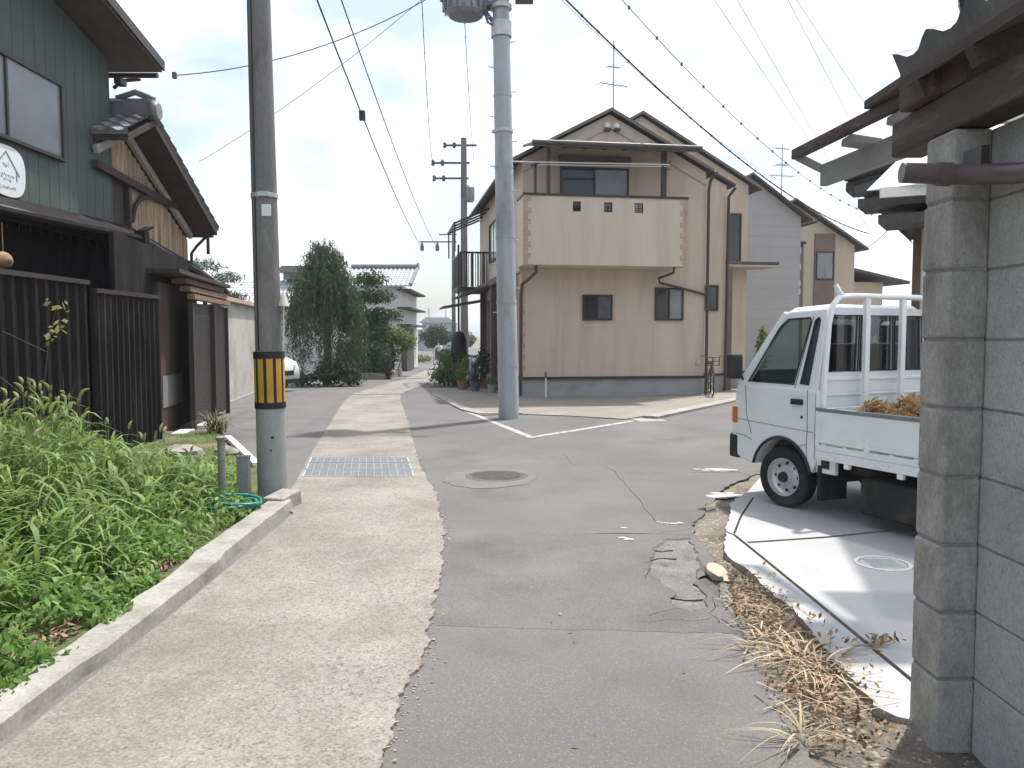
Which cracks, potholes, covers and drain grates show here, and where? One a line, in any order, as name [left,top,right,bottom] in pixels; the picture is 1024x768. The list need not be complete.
pothole [696,567,721,598]
manhole cover [443,468,537,489]
manhole cover [854,555,913,572]
pothole [647,538,708,611]
crack [567,457,720,623]
